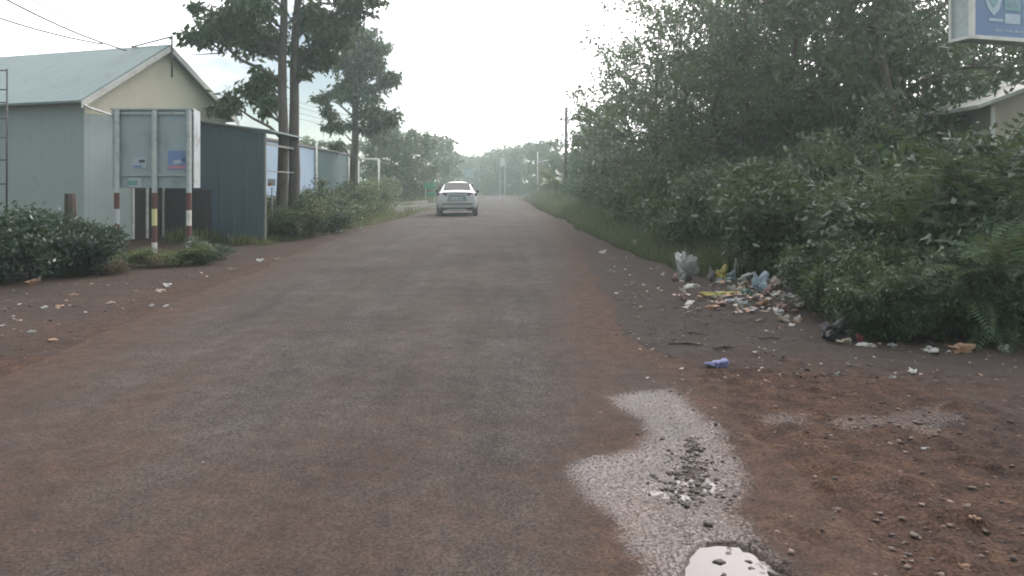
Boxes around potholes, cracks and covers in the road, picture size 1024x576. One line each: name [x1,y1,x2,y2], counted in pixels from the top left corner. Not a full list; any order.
pothole [664,529,815,576]
